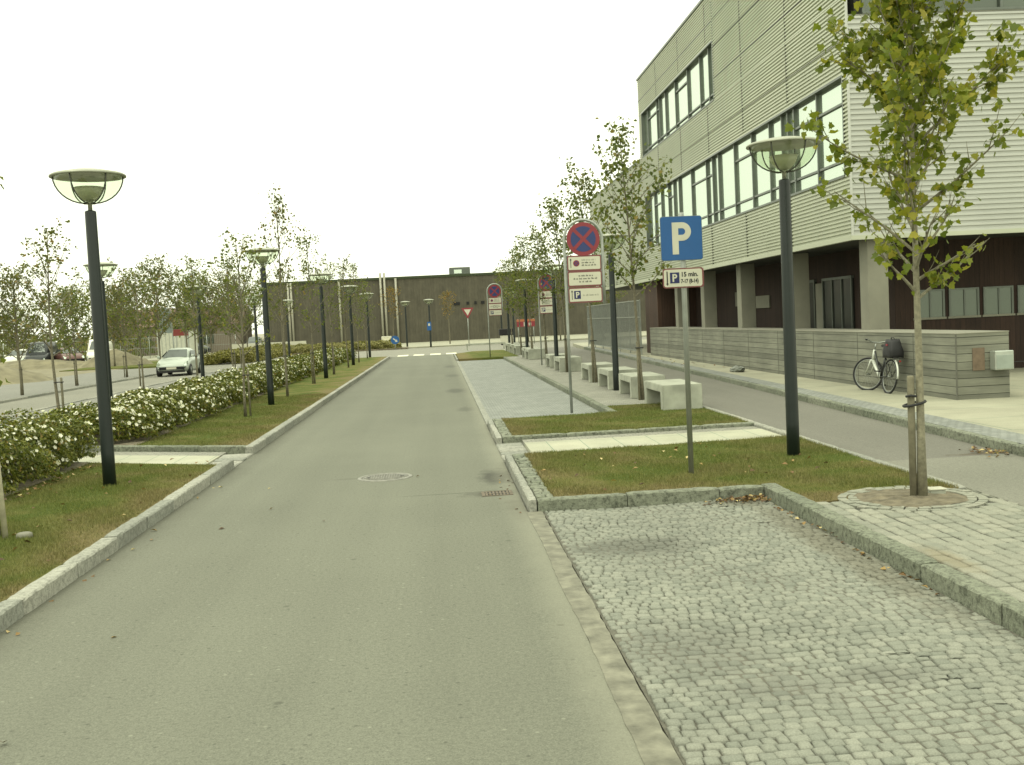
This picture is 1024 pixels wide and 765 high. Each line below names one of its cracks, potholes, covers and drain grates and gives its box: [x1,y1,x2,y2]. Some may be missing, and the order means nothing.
manhole cover [358,473,413,482]
